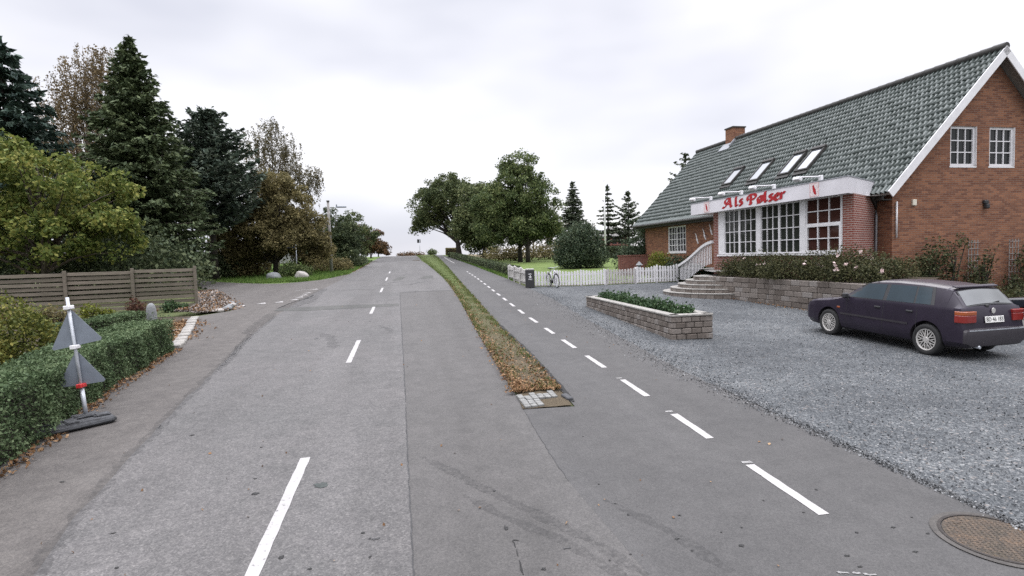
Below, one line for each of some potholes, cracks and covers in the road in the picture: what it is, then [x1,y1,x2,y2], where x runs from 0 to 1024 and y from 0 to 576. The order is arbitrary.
manhole cover [929,512,1024,568]
